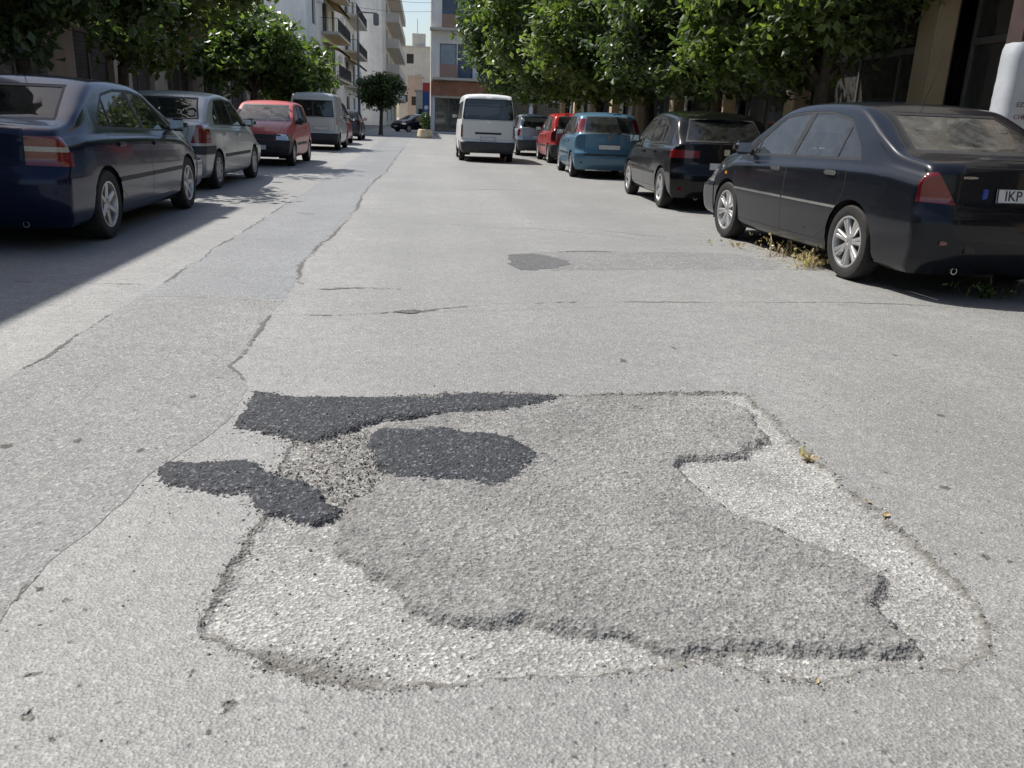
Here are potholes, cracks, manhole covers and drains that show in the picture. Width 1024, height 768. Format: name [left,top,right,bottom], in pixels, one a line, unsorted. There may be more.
crack [164,201,309,282]
crack [19,314,112,370]
crack [227,315,272,381]
crack [296,147,405,284]
